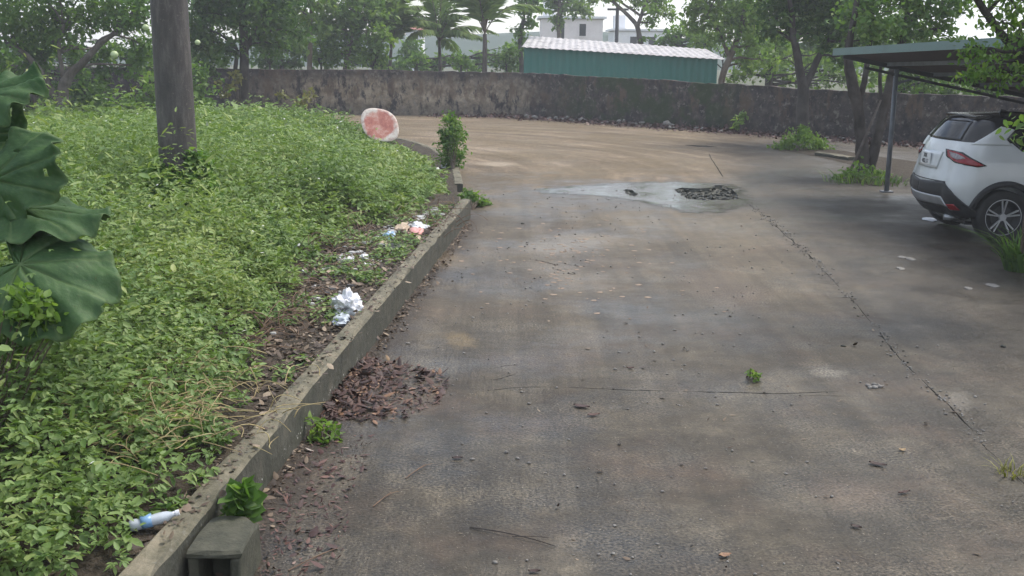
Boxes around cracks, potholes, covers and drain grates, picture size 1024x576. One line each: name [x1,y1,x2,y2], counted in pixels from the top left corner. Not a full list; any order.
pothole [675,185,738,200]
